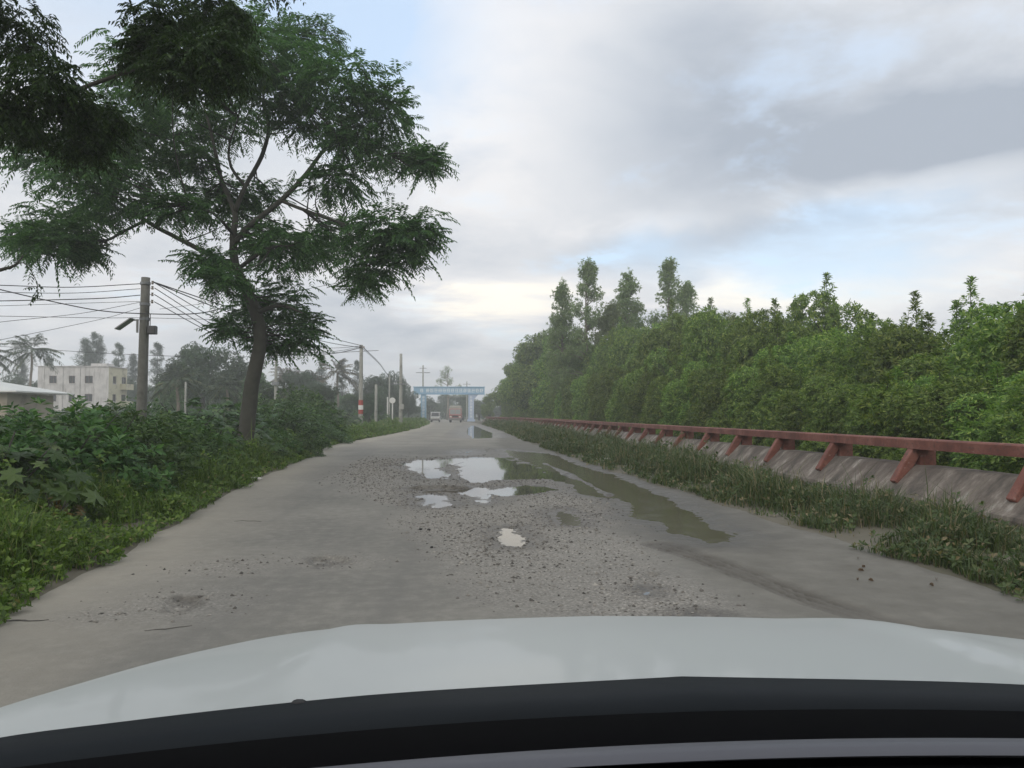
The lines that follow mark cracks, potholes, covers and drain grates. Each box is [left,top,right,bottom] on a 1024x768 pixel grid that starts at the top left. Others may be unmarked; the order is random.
pothole [411,483,562,504]
pothole [494,527,528,548]
pothole [309,555,351,569]
pothole [163,596,200,613]
pothole [501,449,744,545]
